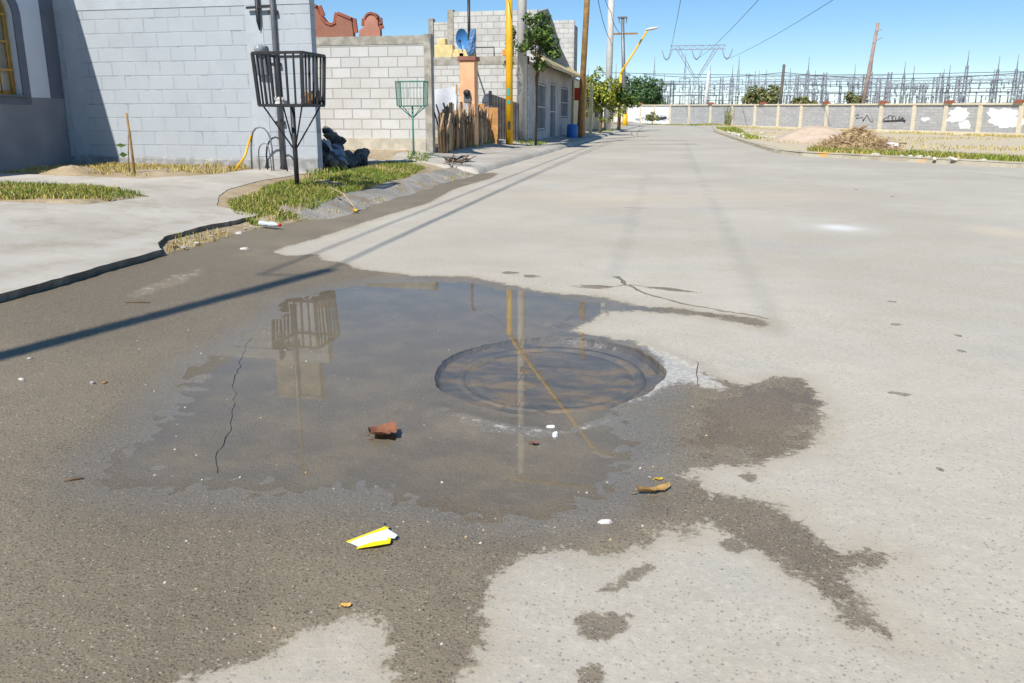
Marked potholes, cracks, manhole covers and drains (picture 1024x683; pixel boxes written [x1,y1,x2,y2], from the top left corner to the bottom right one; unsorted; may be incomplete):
crack [574,276,769,319]
crack [215,338,252,473]
manhole cover [456,347,646,413]
